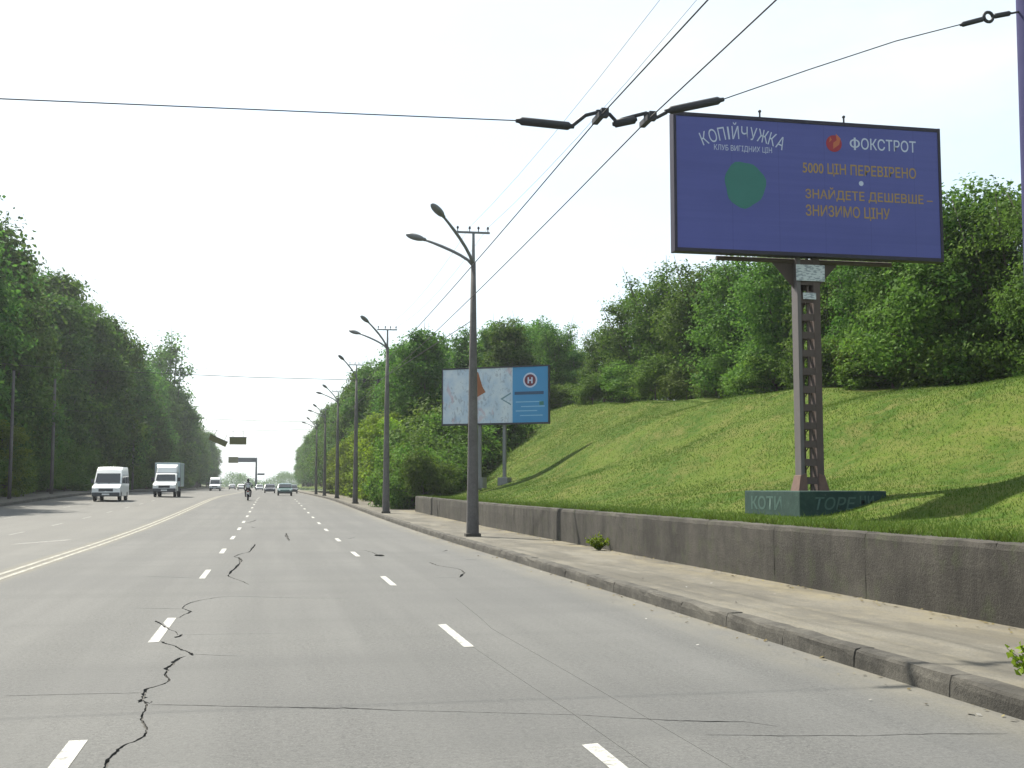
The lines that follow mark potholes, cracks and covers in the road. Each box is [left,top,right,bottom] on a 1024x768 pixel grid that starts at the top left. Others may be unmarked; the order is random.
crack [103,520,282,768]
